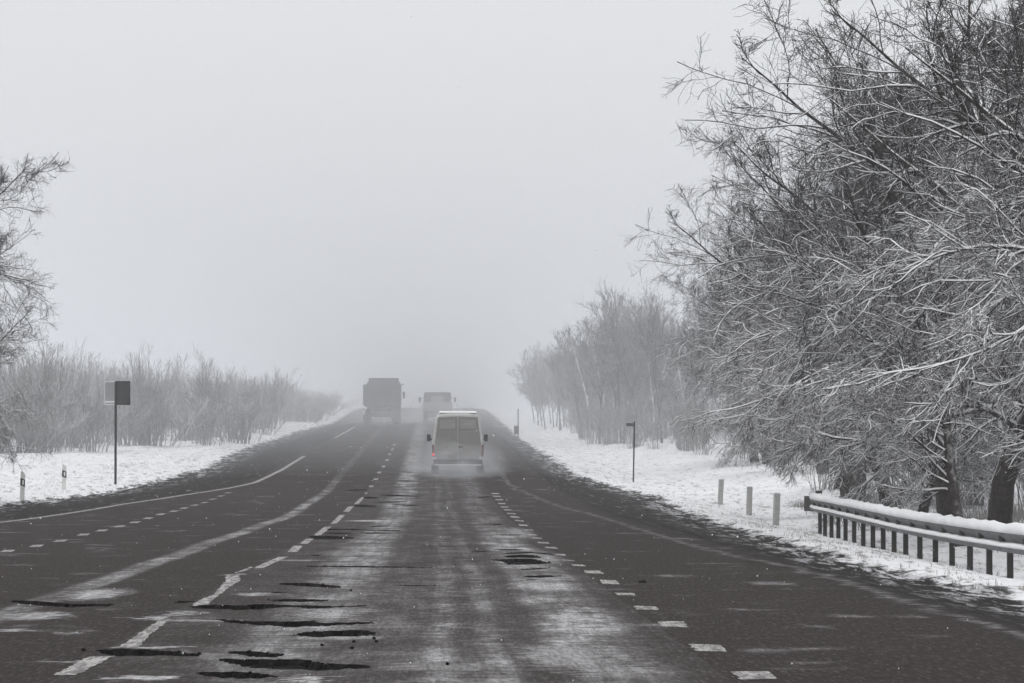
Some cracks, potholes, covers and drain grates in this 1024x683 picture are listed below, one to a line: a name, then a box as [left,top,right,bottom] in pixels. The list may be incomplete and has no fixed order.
pothole [96,649,203,657]
pothole [197,671,279,679]
pothole [217,619,375,631]
pothole [227,650,284,660]
pothole [219,658,370,671]
